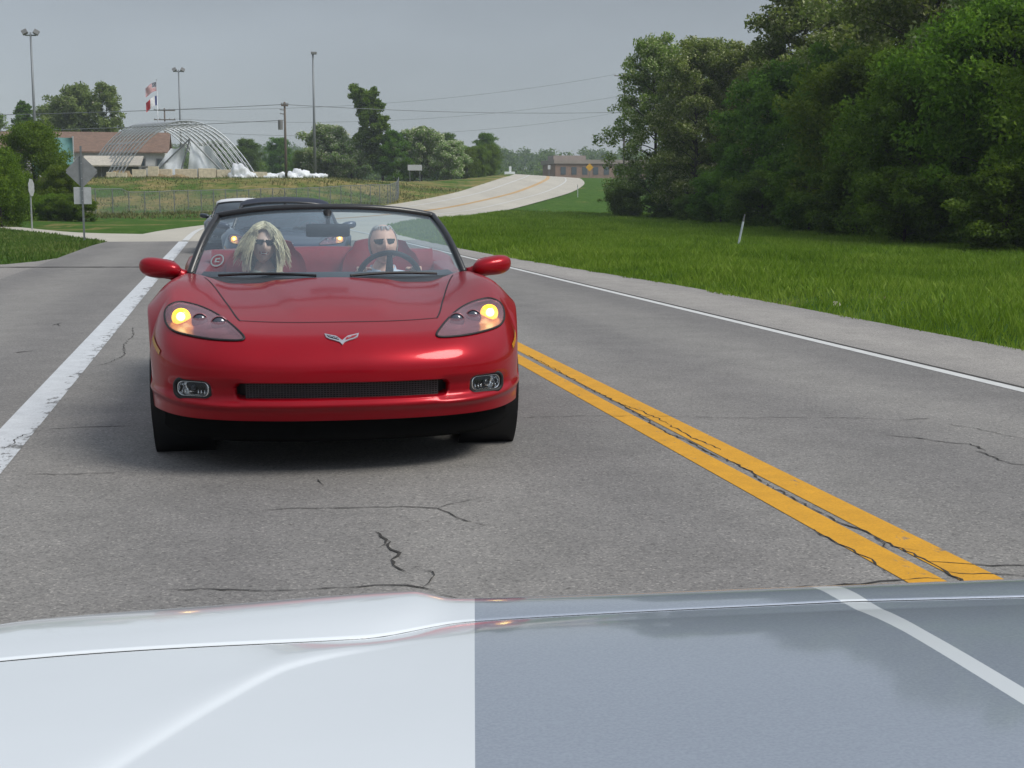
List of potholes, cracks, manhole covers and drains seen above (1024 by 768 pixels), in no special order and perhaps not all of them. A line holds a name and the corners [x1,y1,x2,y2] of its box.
crack [282,497,486,525]
crack [181,531,456,598]
